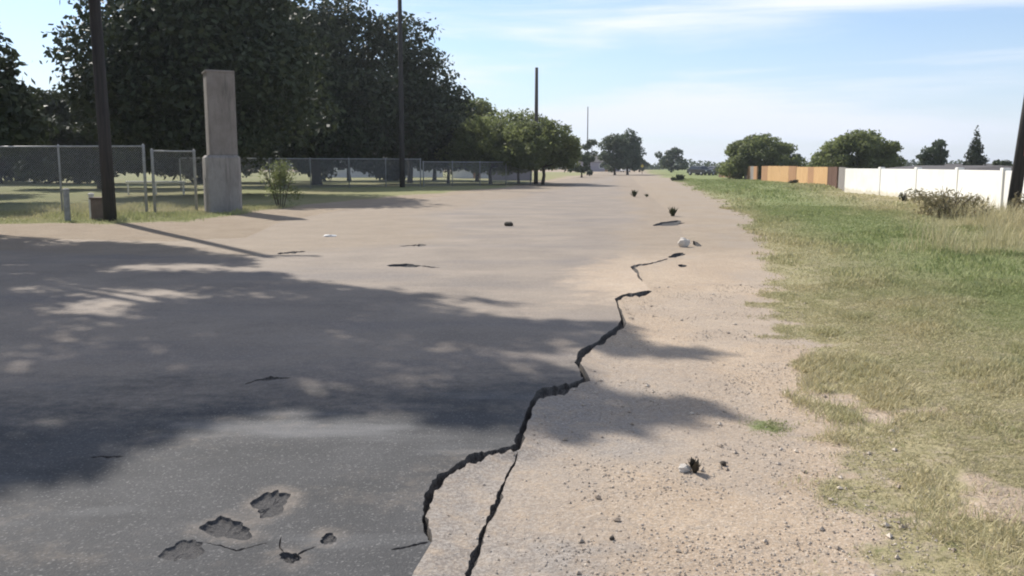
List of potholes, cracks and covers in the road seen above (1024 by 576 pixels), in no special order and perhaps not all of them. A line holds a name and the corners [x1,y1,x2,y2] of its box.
crack [206,536,316,558]
pothole [320,533,337,544]
pothole [158,539,205,562]
crack [244,376,290,385]
pothole [250,490,291,518]
crack [391,258,668,576]
pothole [199,515,253,540]
